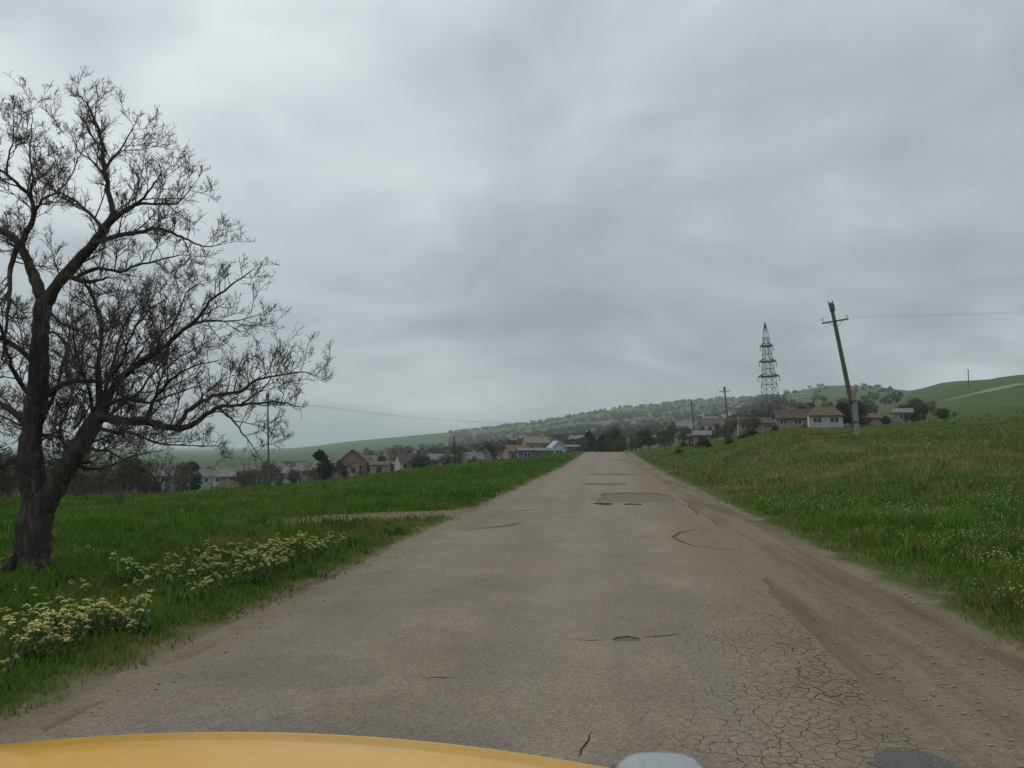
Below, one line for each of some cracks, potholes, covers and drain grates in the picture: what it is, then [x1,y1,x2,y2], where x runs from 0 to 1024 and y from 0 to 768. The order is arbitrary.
crack [672,504,742,551]
crack [640,589,918,768]
